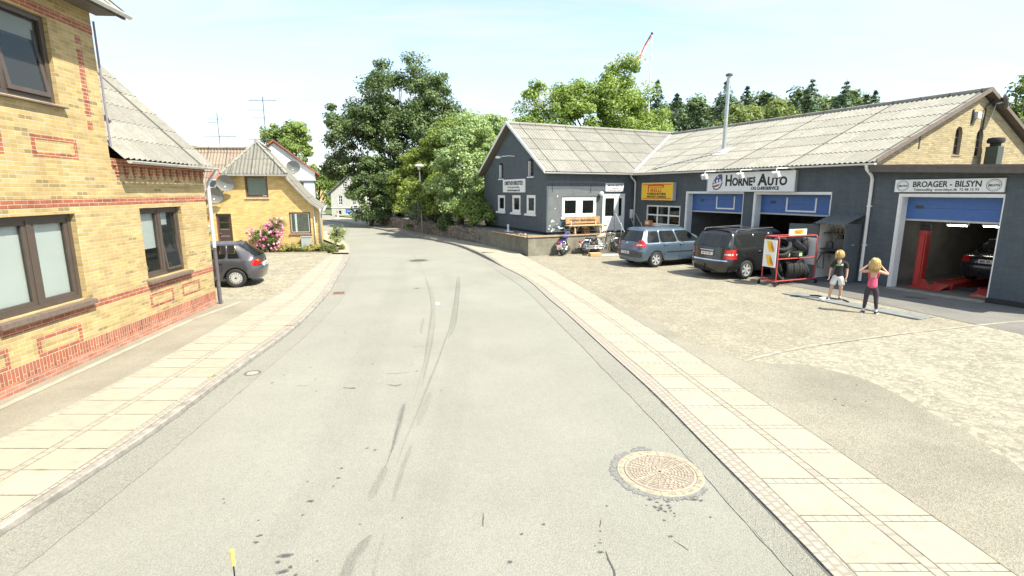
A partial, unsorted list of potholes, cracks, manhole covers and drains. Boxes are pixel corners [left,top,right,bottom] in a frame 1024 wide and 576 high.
manhole cover [617,451,705,497]
